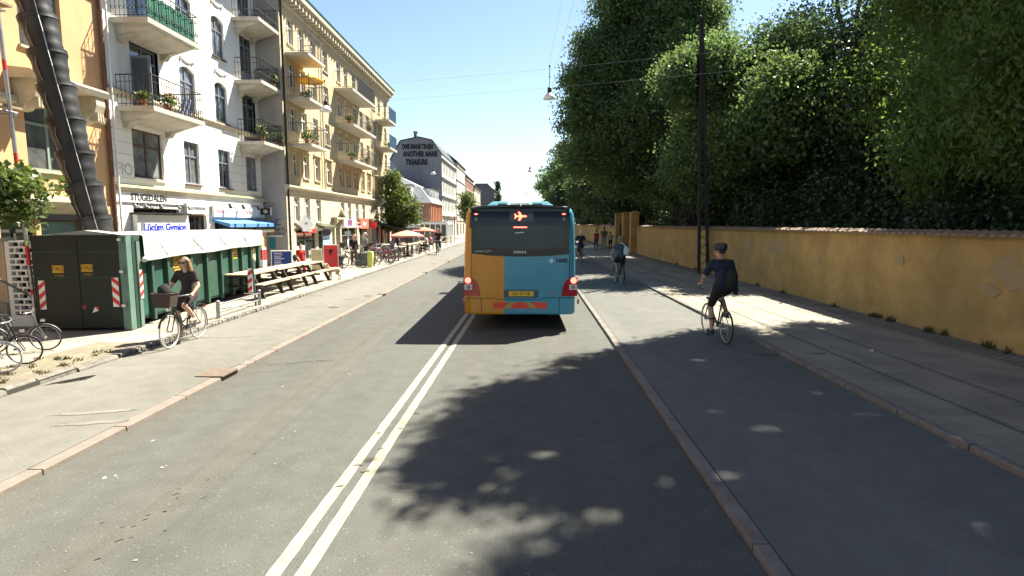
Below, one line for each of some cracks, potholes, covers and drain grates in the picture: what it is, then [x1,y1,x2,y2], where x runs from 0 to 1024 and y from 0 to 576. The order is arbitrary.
drain grate [195,368,238,381]
